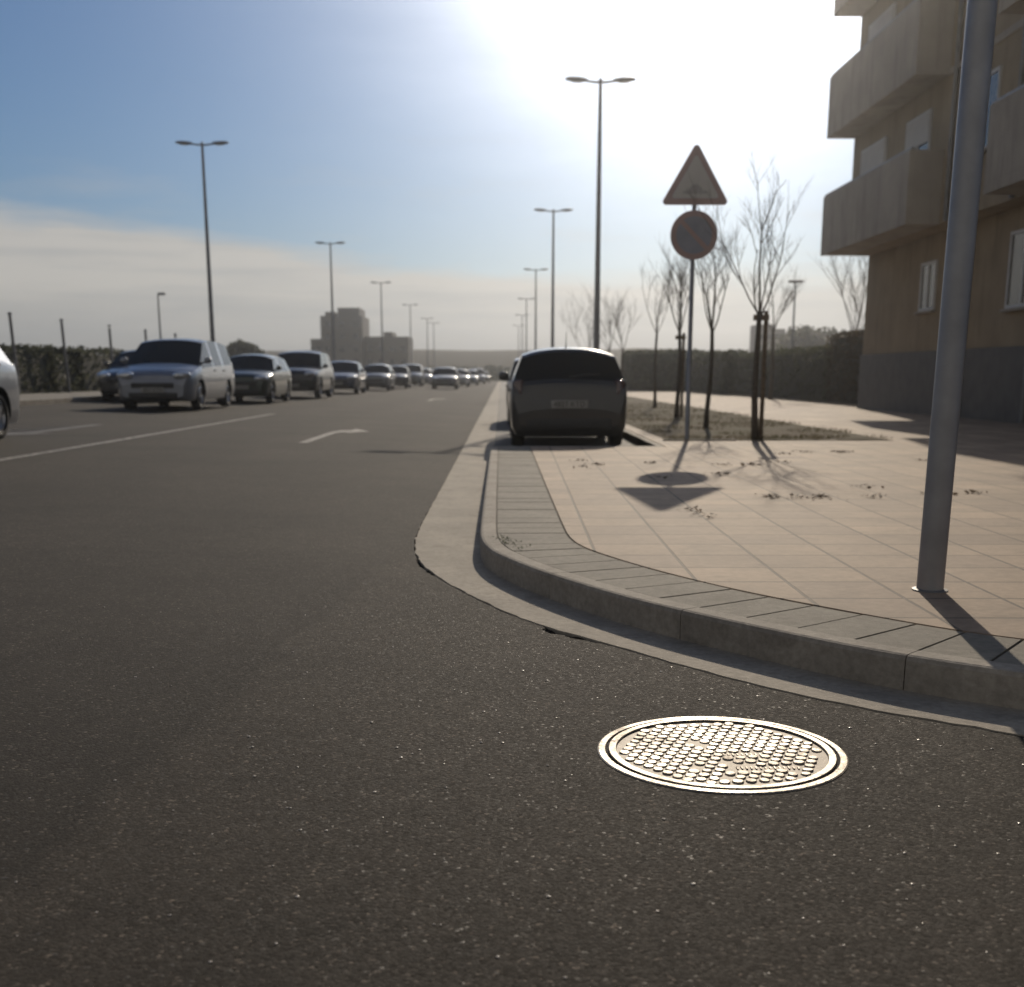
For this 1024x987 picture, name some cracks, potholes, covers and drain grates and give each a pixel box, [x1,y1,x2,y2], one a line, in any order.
manhole cover [597,716,849,795]
